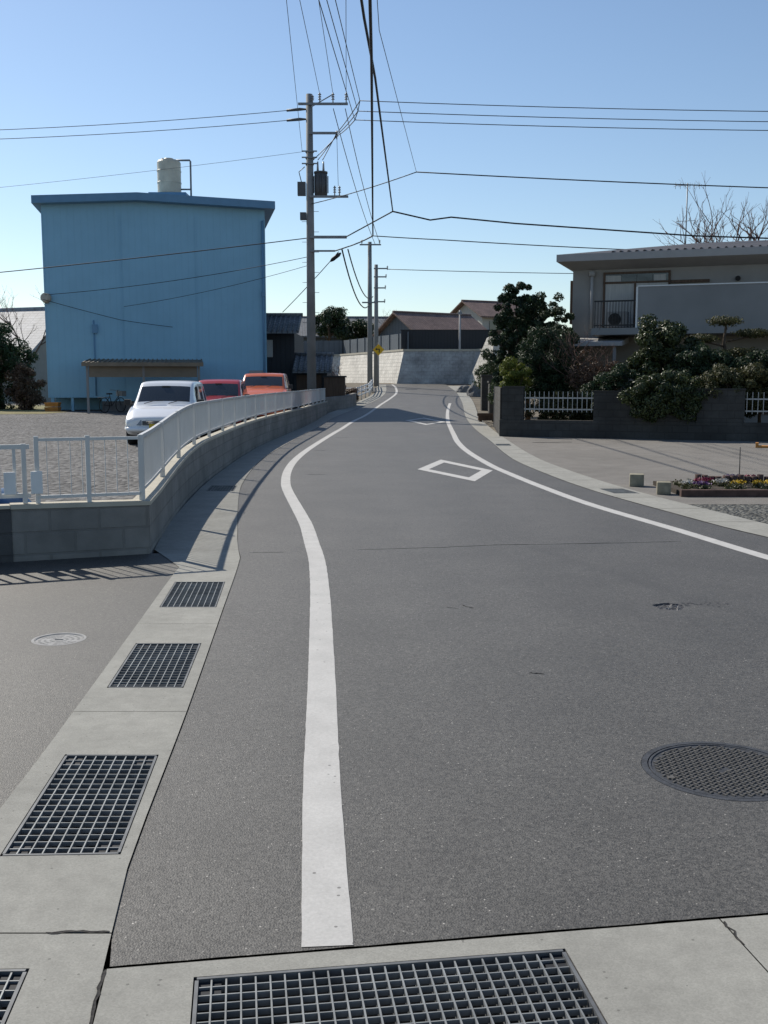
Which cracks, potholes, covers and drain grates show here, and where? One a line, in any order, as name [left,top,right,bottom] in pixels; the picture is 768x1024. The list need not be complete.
manhole cover [641,741,768,802]
manhole cover [31,633,86,646]
drain grate [160,582,225,607]
pothole [653,602,729,610]
crack [724,921,745,945]
drain grate [192,949,606,1024]
drain grate [2,754,157,856]
drain grate [108,643,201,688]
drain grate [0,969,27,1024]
